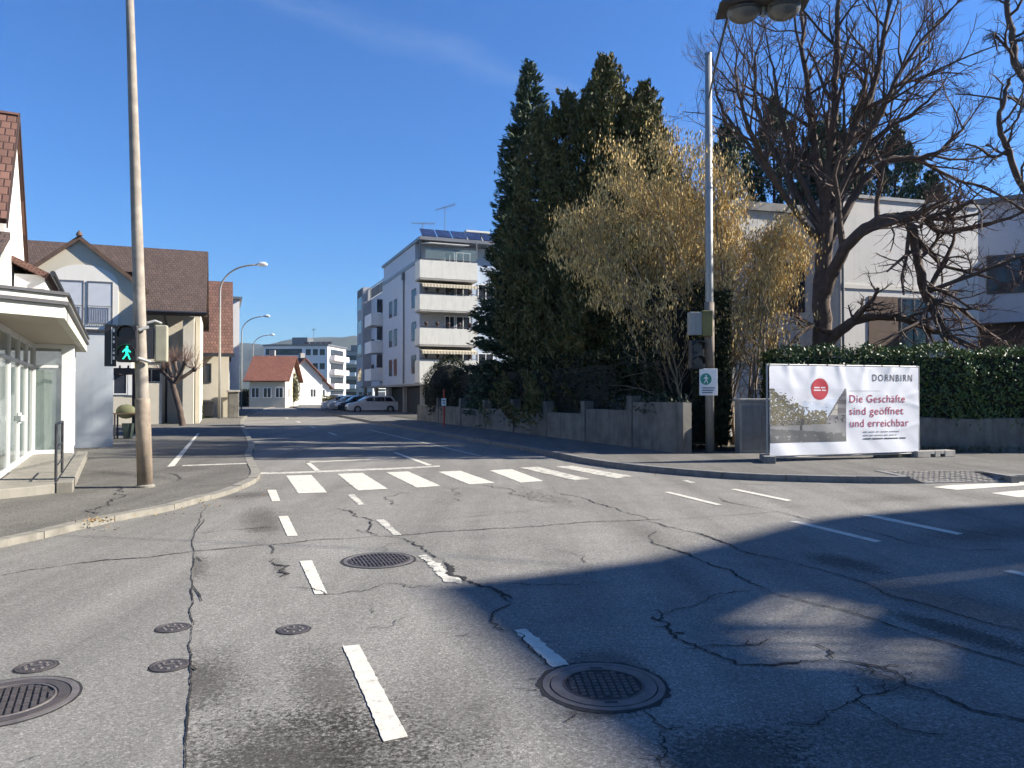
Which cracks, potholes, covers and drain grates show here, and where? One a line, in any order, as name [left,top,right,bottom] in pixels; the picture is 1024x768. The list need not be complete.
manhole cover [276,624,311,635]
crack [641,707,685,765]
crack [651,589,1024,735]
manhole cover [154,622,192,633]
crack [4,485,1024,690]
manhole cover [12,659,60,674]
manhole cover [536,661,672,714]
manhole cover [147,658,192,673]
